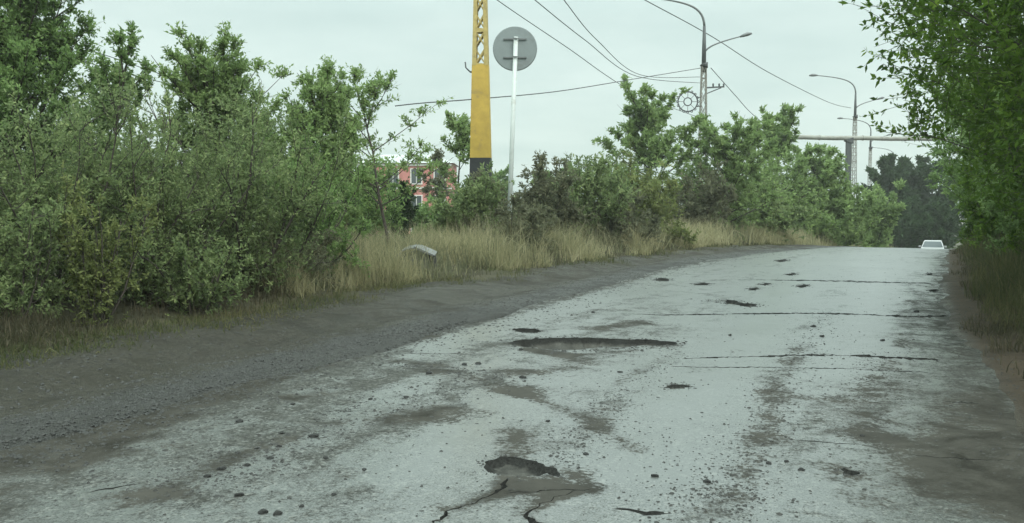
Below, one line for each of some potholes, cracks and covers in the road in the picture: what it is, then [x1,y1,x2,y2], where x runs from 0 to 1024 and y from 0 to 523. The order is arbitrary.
crack [432,478,596,523]
pothole [484,456,560,477]
pothole [507,337,677,350]
crack [615,508,672,517]
